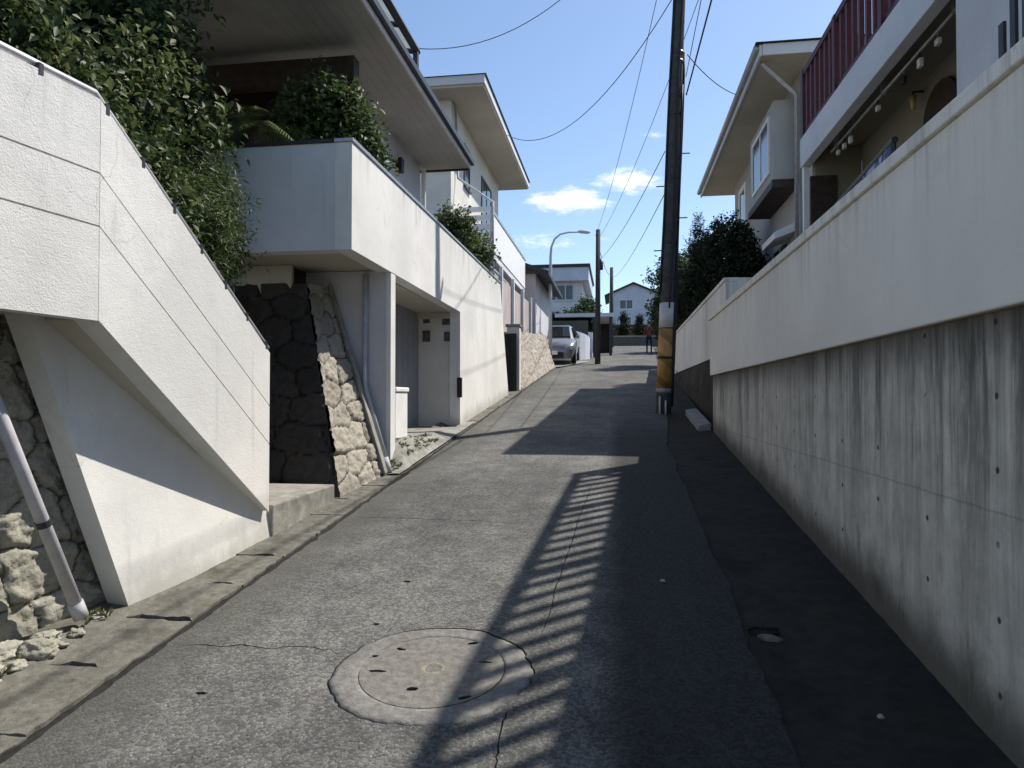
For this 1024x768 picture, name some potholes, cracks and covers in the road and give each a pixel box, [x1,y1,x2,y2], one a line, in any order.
crack [184,644,339,654]
pothole [748,626,783,642]
crack [494,488,591,768]
manhole cover [327,628,535,726]
